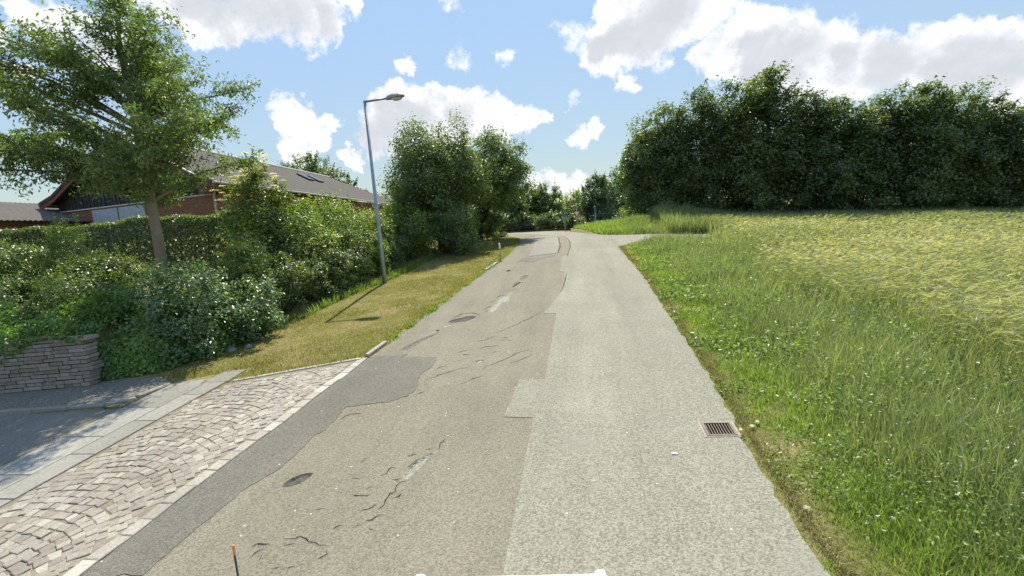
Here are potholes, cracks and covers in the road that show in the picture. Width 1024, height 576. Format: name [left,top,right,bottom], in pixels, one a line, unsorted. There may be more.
drain grate [697,421,743,438]
crack [248,439,445,569]
crack [416,281,543,395]
pothole [283,473,313,487]
pothole [403,451,438,479]
